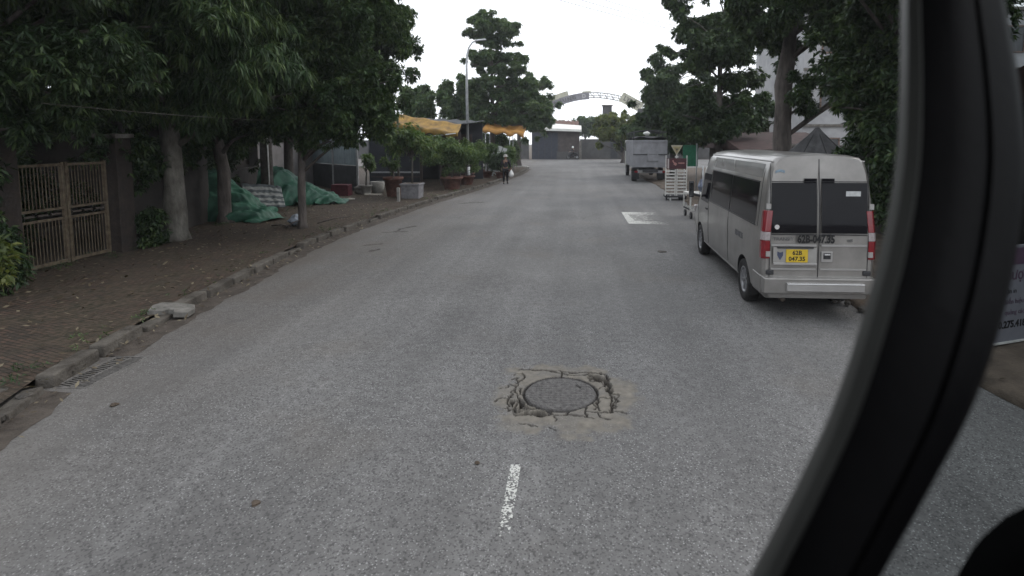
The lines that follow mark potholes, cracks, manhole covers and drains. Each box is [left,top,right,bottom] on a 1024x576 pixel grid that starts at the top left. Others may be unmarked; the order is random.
manhole cover [522,377,599,416]
drain grate [53,356,149,389]
crack [494,368,629,432]
